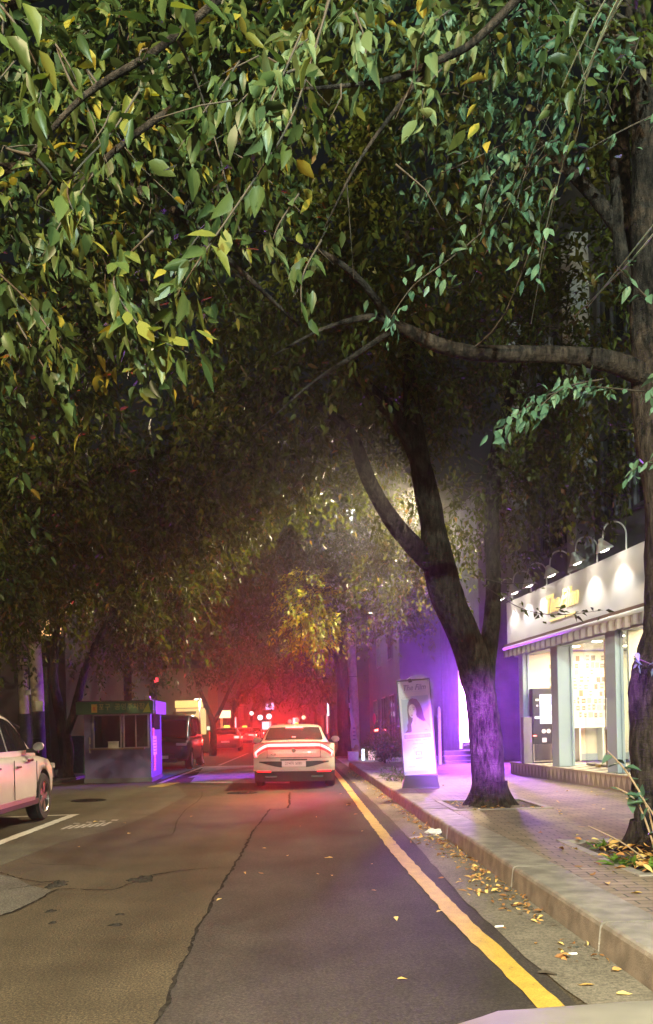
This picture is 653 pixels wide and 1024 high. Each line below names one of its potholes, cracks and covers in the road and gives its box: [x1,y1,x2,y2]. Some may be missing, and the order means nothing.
crack [0,863,218,916]
crack [139,791,203,842]
pothole [125,875,153,883]
pothole [44,880,69,889]
